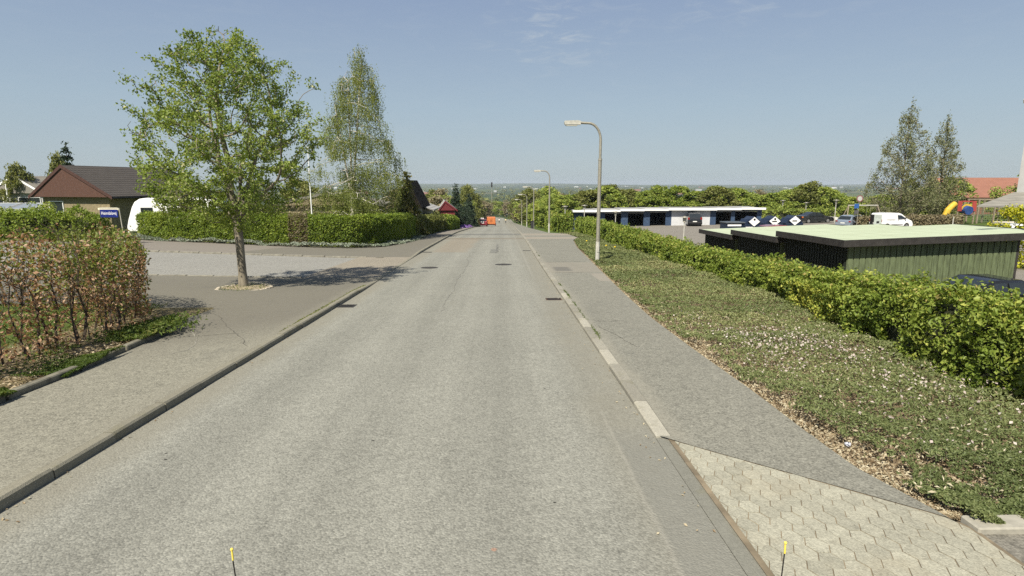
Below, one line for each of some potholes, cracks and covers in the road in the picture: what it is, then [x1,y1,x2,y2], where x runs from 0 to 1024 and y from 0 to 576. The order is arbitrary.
crack [168,306,247,355]
